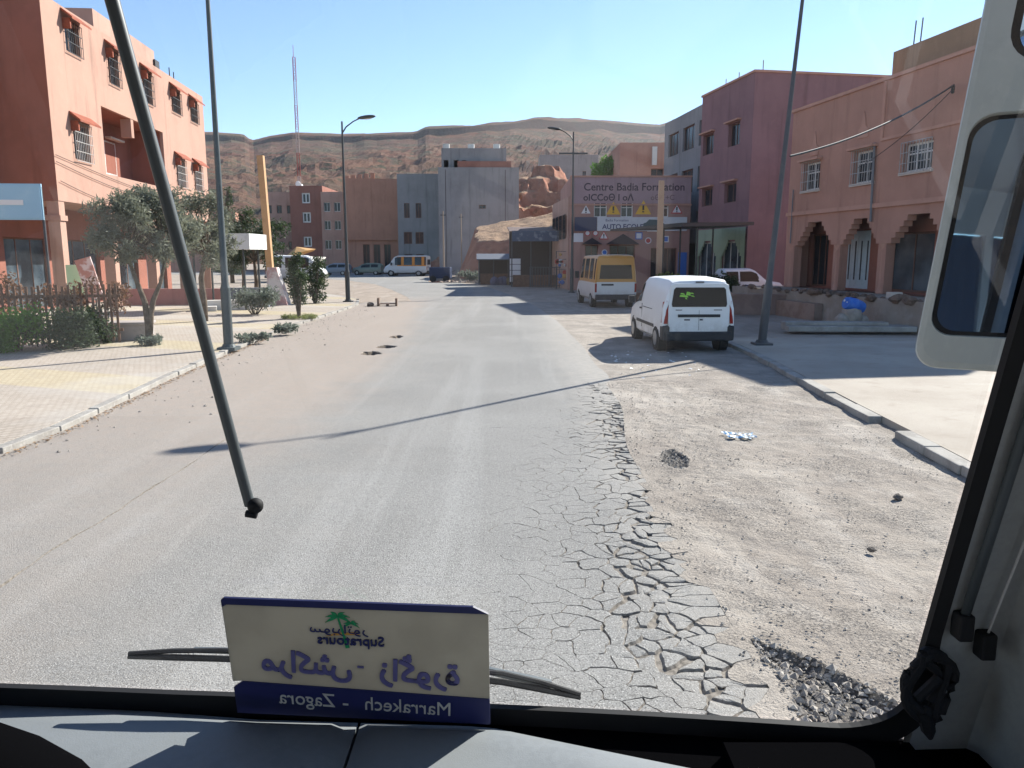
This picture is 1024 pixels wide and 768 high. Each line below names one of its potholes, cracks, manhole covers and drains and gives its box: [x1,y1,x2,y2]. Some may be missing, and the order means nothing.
pothole [660,449,690,468]
crack [450,384,769,718]
